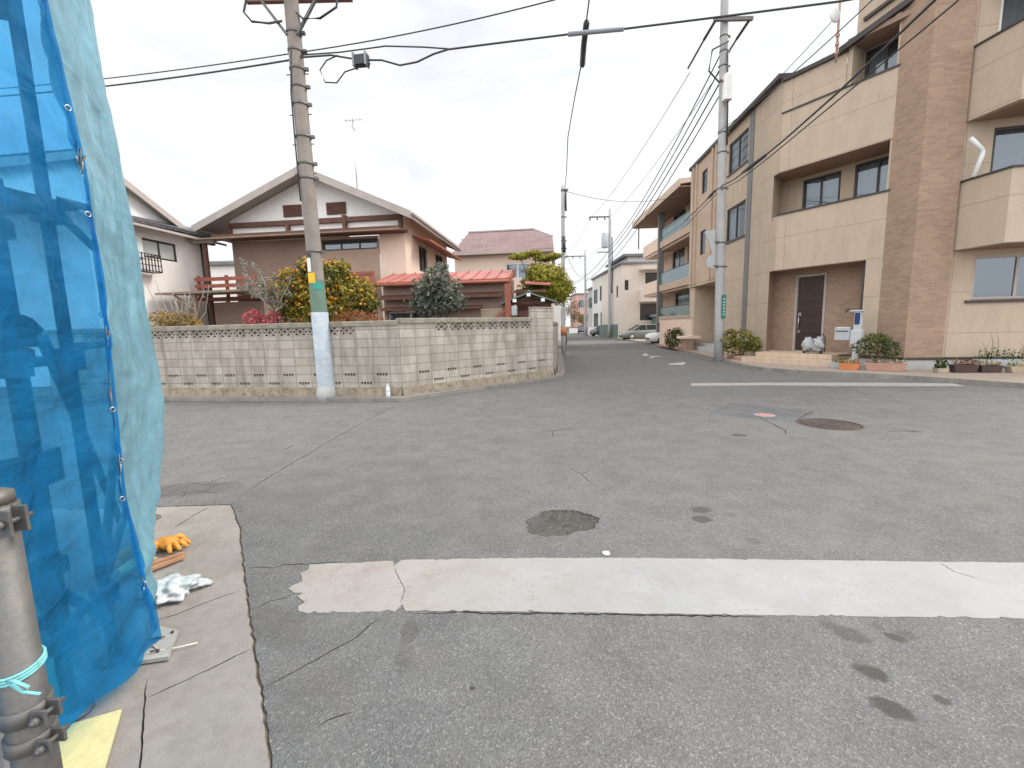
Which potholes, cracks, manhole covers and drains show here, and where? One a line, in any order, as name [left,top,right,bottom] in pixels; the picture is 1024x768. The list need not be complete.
crack [395,568,770,618]
manhole cover [796,418,866,431]
